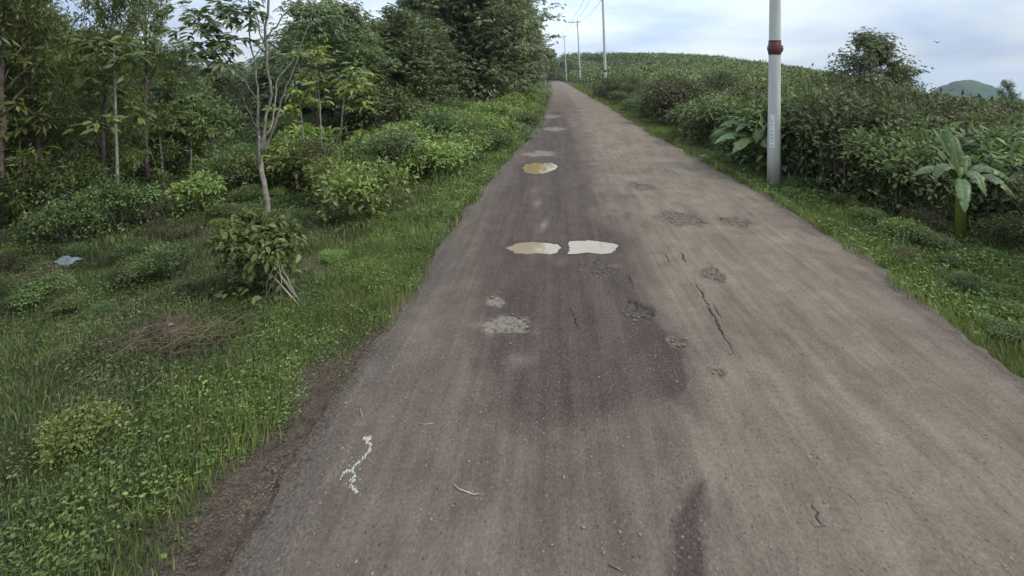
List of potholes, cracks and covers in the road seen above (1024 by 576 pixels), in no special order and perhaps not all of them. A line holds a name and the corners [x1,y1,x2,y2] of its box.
pothole [473,313,538,336]
pothole [520,161,559,175]
pothole [714,216,757,229]
pothole [694,264,731,287]
pothole [613,296,662,324]
crack [804,502,827,527]
crack [566,306,581,329]
pothole [500,240,570,256]
pothole [652,209,710,227]
pothole [482,294,509,311]
crack [660,250,736,354]
pothole [562,238,624,255]
